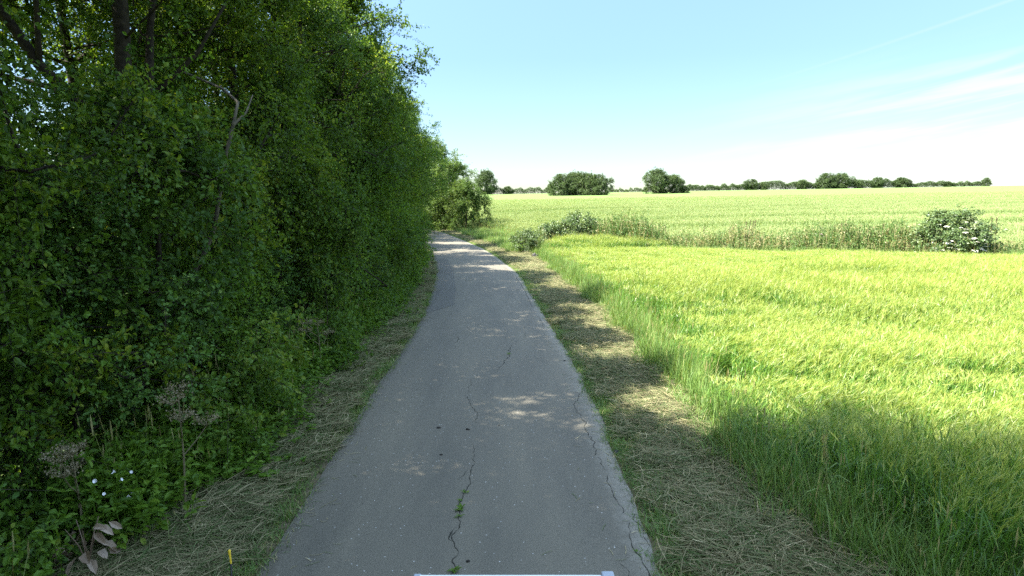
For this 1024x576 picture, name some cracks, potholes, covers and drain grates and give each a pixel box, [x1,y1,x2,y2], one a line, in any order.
crack [448,443,475,575]
crack [574,391,651,576]
